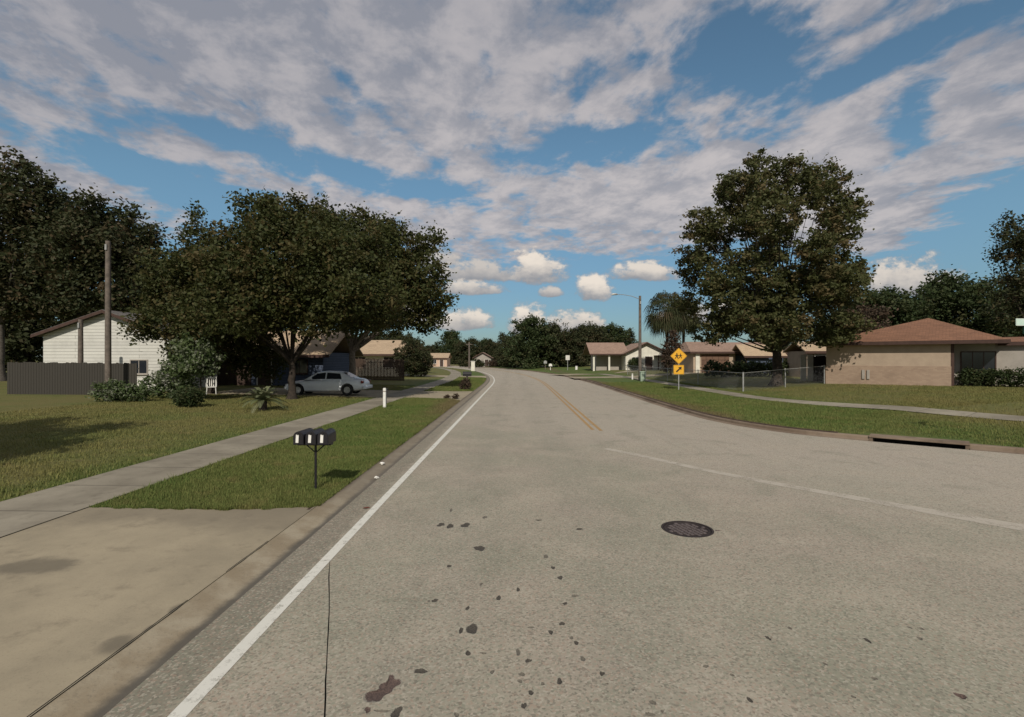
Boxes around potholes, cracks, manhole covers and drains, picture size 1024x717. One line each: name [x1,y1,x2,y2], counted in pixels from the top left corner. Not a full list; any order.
drain grate [869,433,970,450]
manhole cover [661,521,714,538]
